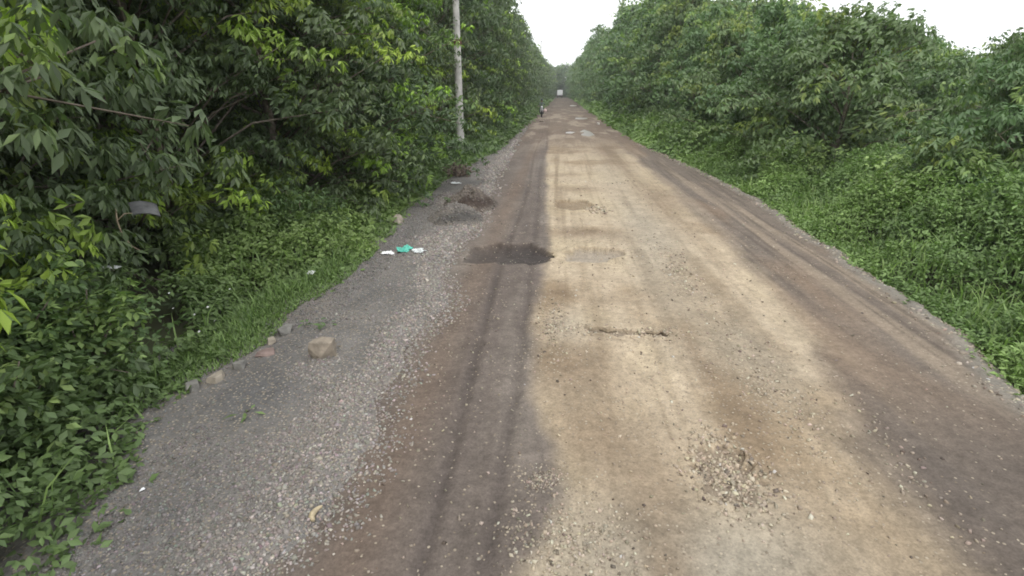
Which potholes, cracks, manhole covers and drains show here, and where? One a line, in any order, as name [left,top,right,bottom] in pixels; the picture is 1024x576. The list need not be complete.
pothole [456,240,565,268]
pothole [678,438,781,516]
